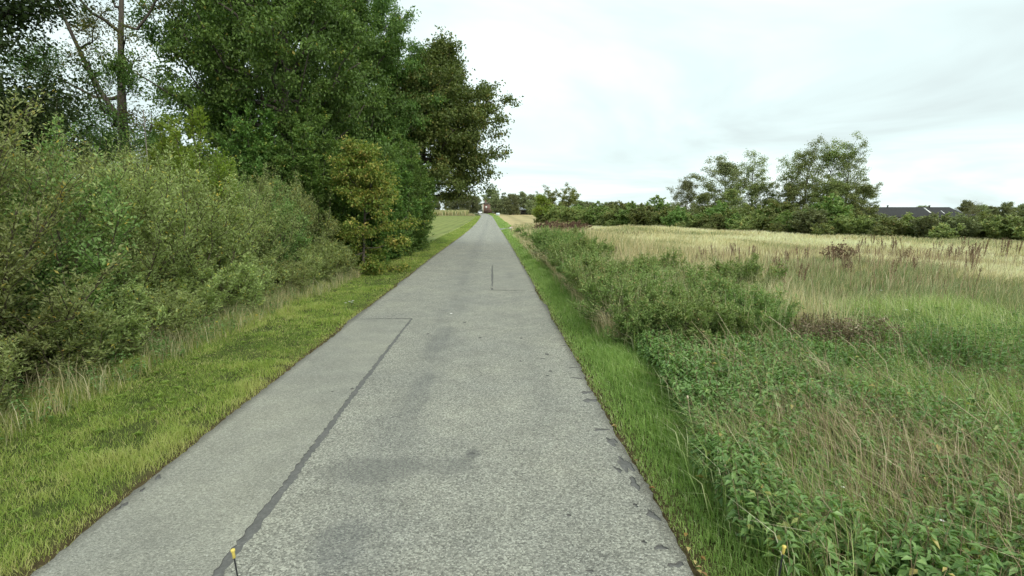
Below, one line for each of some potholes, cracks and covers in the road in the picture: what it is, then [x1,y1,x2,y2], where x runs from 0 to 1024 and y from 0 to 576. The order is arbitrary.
pothole [617,456,636,473]
